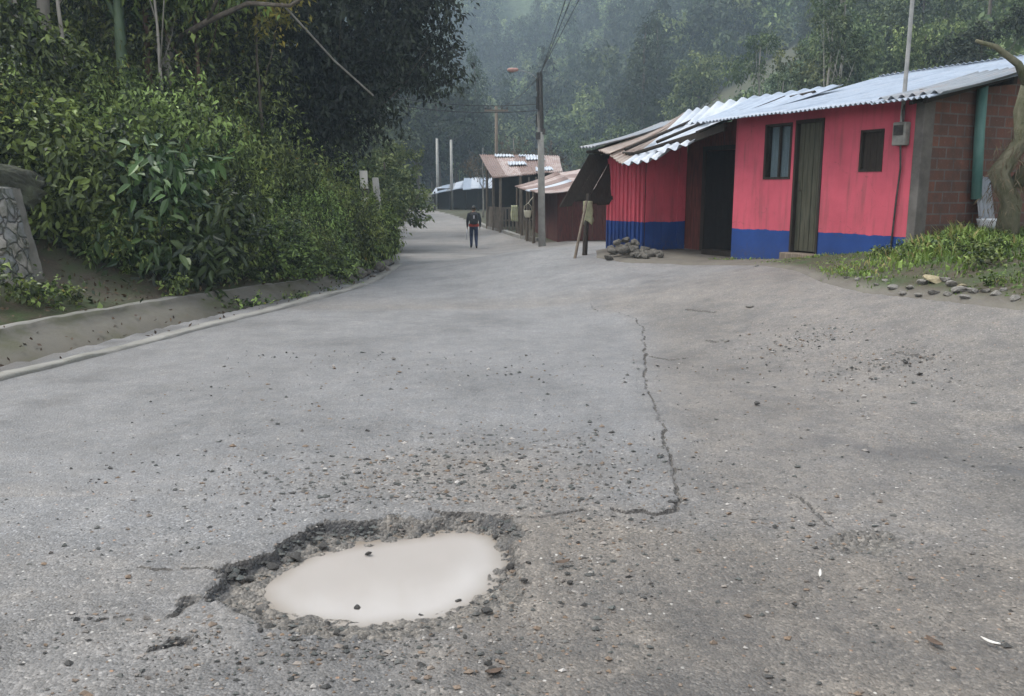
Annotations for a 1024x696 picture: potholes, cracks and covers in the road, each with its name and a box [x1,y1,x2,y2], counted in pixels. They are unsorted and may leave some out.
pothole [204,512,531,642]
crack [790,493,847,532]
crack [594,309,688,516]
